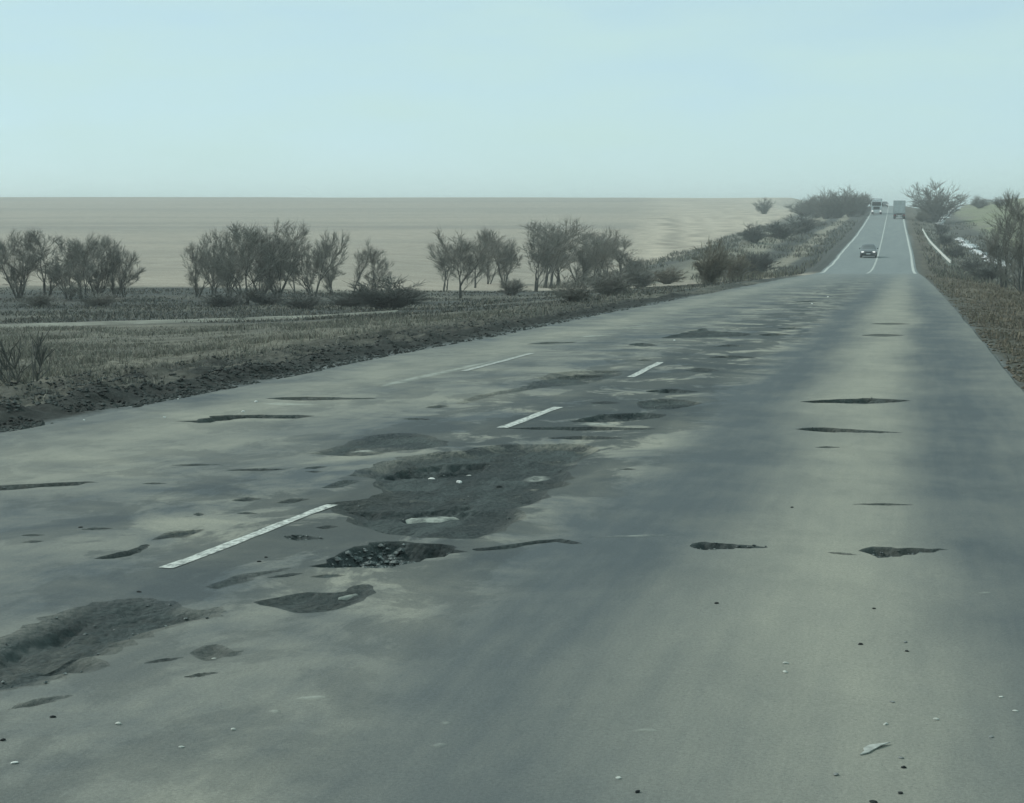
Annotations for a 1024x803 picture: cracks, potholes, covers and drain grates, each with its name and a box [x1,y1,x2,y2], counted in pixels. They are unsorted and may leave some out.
pothole [690,542,767,550]
pothole [0,623,95,670]
pothole [859,546,949,558]
pothole [348,504,480,524]
pothole [181,415,311,423]
pothole [310,541,467,568]
pothole [0,481,96,490]
pothole [254,584,376,613]
pothole [95,544,150,559]
pothole [378,463,492,481]
